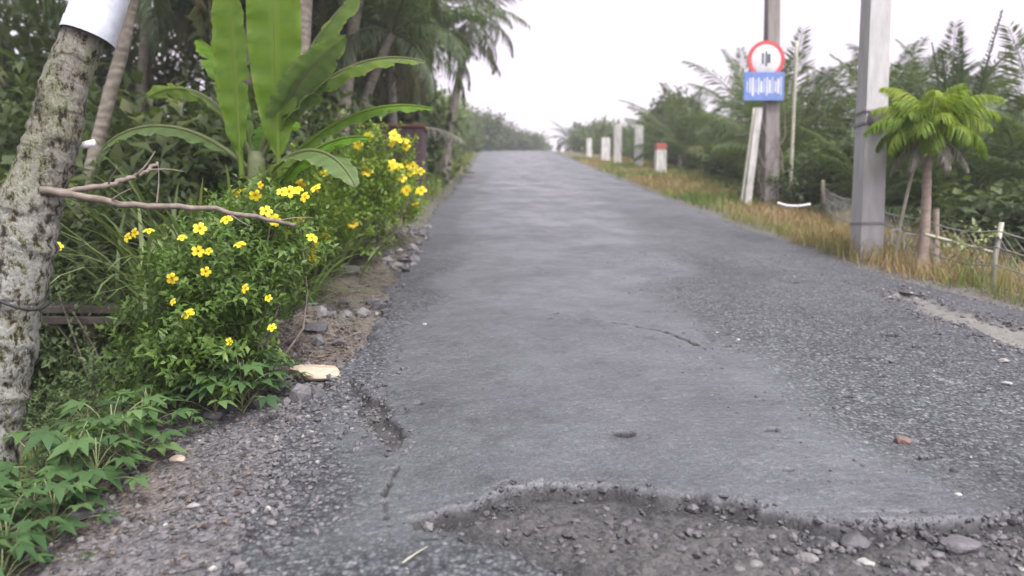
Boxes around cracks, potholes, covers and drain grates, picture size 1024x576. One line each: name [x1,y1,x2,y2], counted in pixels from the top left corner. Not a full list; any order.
pothole [393,474,1024,576]
crack [255,439,432,527]
crack [539,316,736,380]
